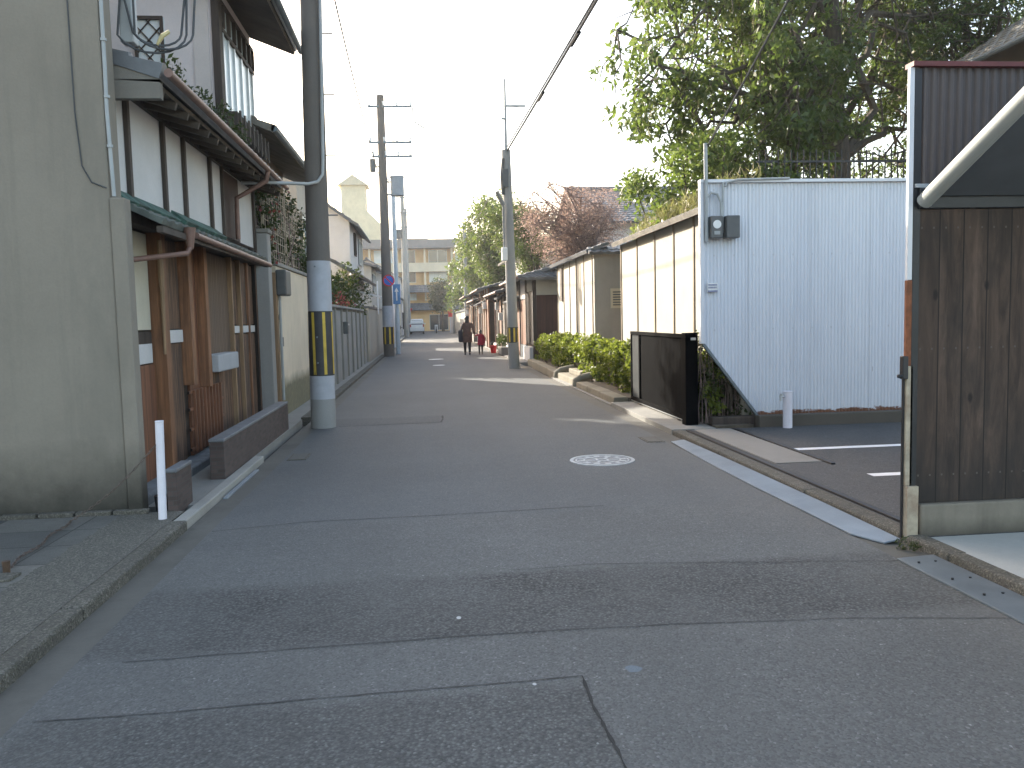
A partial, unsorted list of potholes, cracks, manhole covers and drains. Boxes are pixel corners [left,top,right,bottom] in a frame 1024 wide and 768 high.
manhole cover [570,454,635,466]
